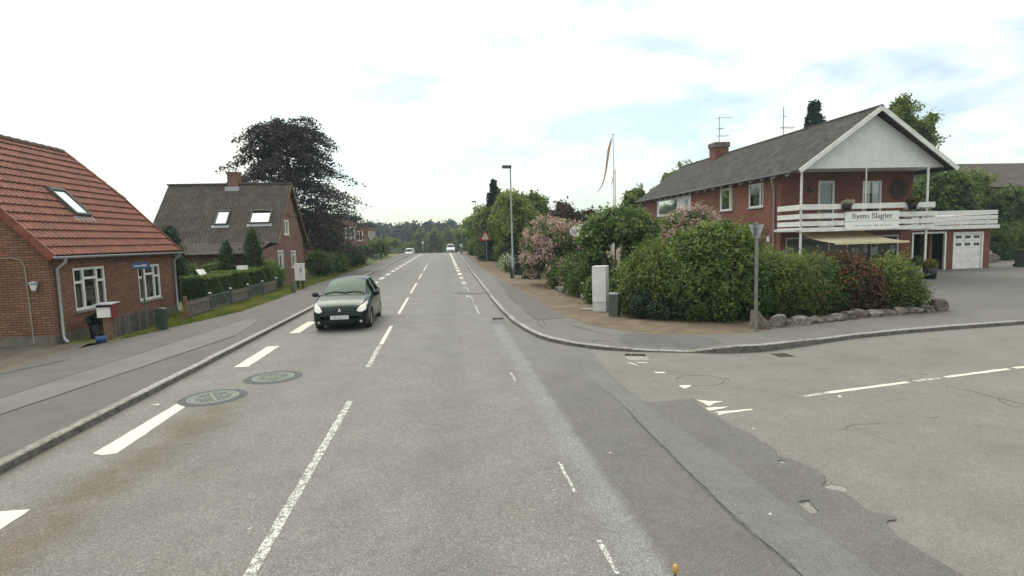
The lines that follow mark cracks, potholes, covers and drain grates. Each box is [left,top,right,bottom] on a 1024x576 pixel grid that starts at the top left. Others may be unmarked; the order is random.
manhole cover [177,389,248,407]
pothole [798,500,819,513]
manhole cover [243,371,303,385]
